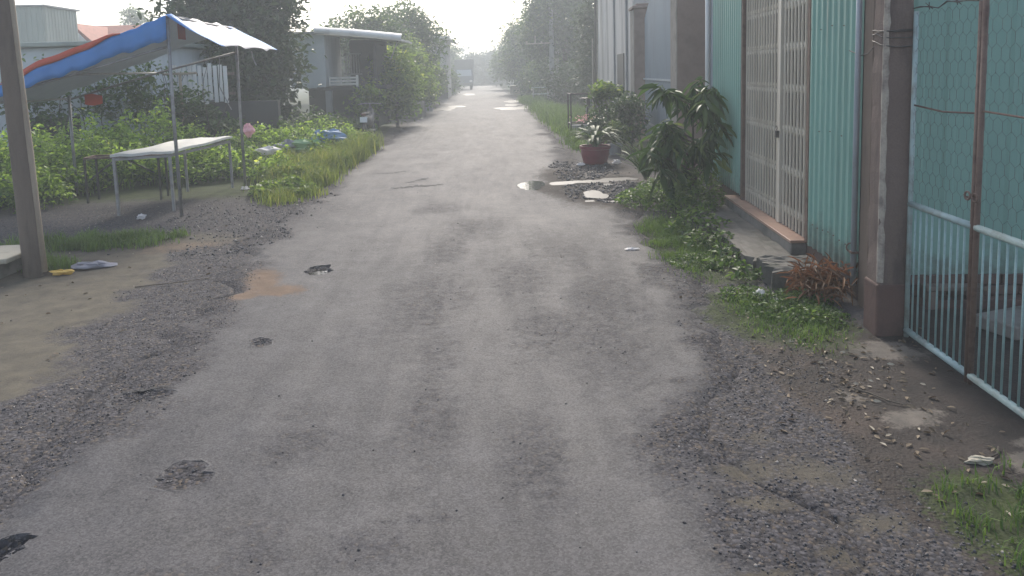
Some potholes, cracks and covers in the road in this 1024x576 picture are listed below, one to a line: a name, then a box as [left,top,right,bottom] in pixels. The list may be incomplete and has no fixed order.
pothole [249,337,274,348]
crack [376,171,441,189]
pothole [105,388,182,408]
pothole [302,264,335,276]
pothole [0,531,44,569]
pothole [146,459,218,494]
